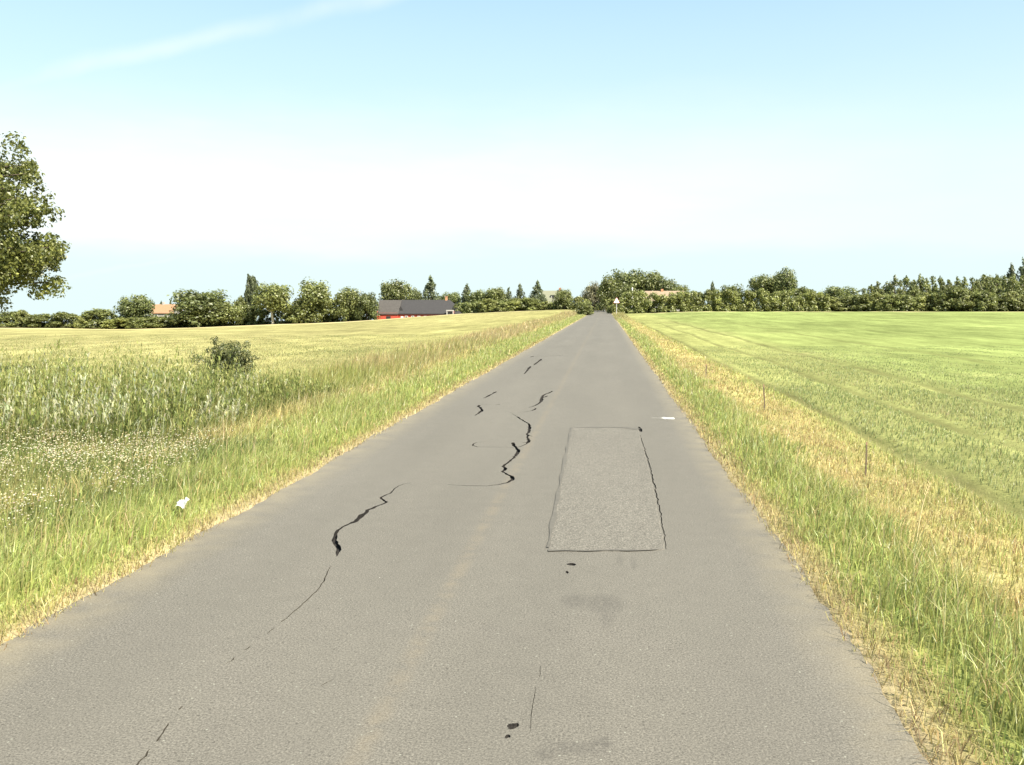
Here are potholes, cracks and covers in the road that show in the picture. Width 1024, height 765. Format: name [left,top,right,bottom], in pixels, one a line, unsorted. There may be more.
crack [448,391,552,486]
crack [136,483,407,765]
